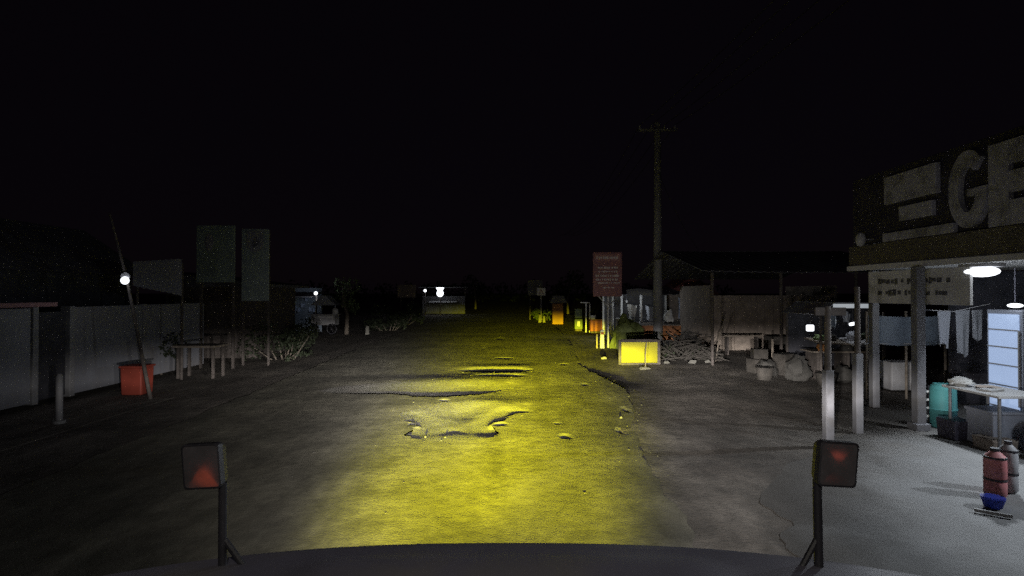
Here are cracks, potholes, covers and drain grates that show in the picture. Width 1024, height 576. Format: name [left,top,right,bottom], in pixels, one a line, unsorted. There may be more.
pothole [399,400,534,440]
